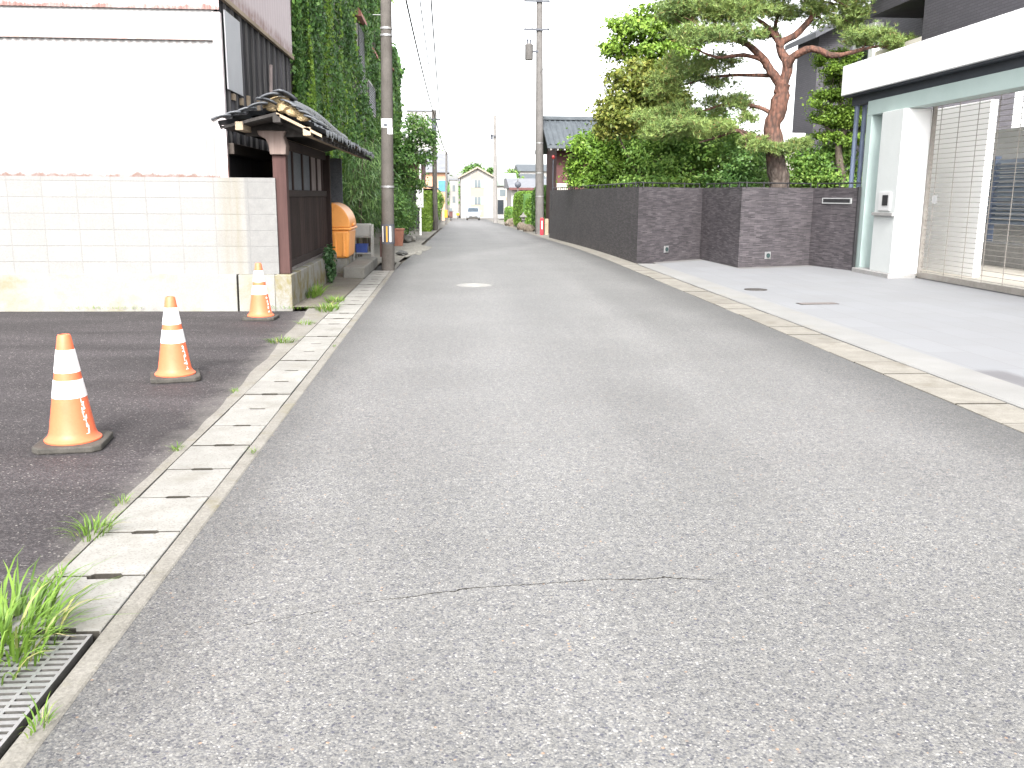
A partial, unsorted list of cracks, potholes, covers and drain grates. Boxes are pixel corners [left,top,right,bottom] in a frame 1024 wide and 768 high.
crack [221,576,728,631]
drain grate [0,634,93,758]
